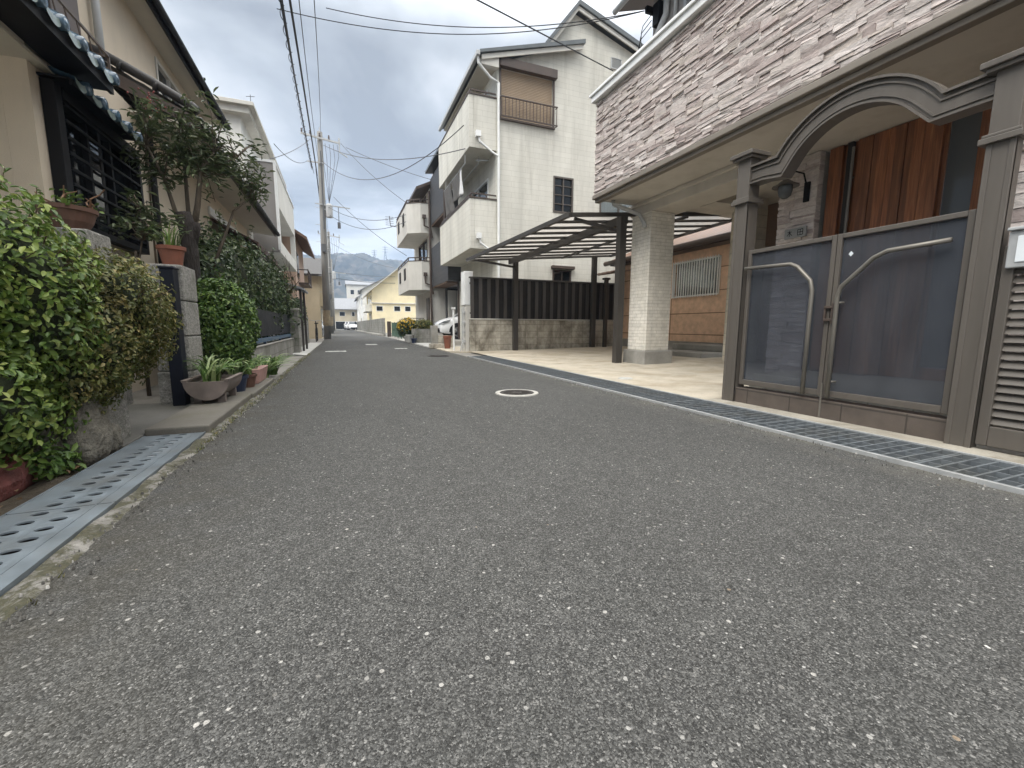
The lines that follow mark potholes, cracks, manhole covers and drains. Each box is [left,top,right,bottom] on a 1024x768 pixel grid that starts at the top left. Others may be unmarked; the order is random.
manhole cover [495,389,539,397]
